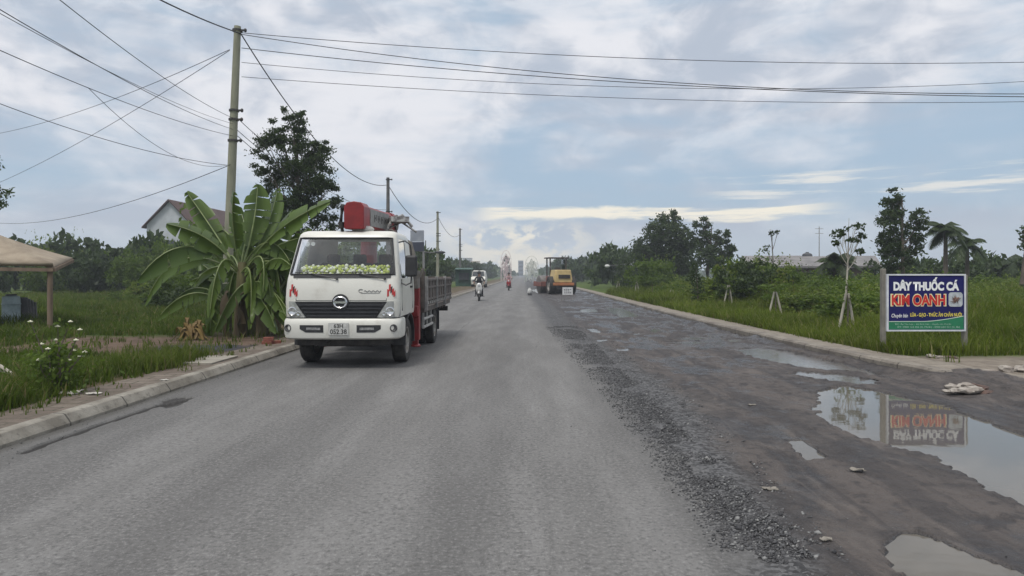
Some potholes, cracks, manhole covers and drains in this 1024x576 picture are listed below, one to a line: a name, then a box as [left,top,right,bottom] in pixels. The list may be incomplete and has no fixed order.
pothole [876,529,1024,576]
pothole [784,439,830,460]
pothole [786,370,886,385]
pothole [728,348,911,382]
pothole [810,382,1024,505]
